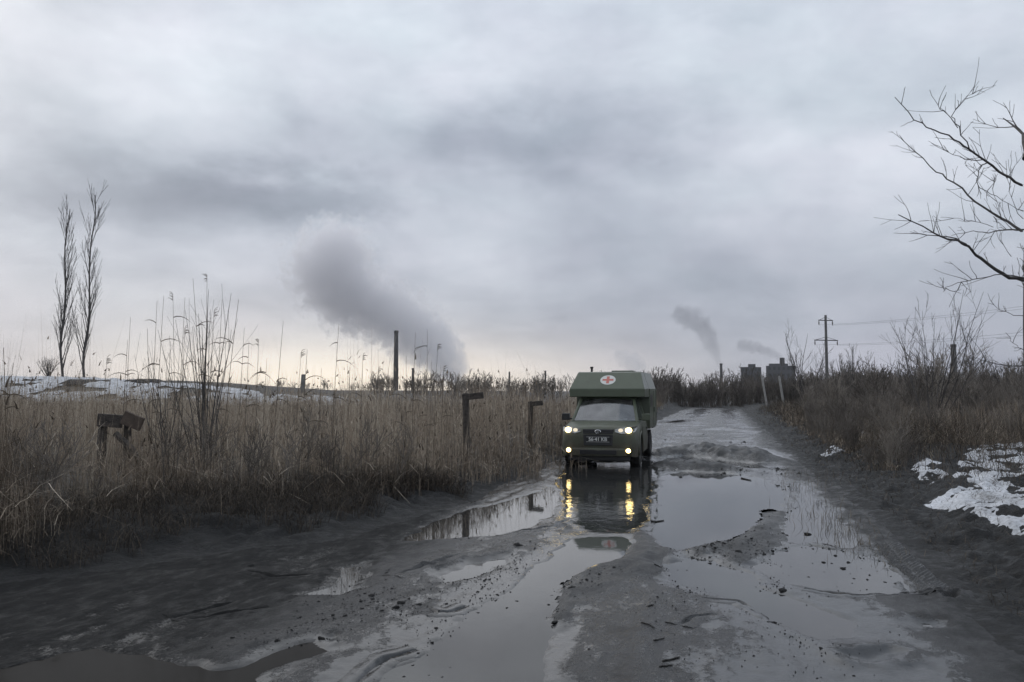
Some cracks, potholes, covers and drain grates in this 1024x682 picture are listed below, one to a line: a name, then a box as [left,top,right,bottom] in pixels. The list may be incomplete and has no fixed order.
pothole [642,468,788,551]
pothole [738,545,917,595]
pothole [549,459,666,534]
pothole [650,553,881,643]
pothole [772,481,885,560]
pothole [388,485,568,543]
pothole [0,630,350,682]
pothole [364,533,638,682]
